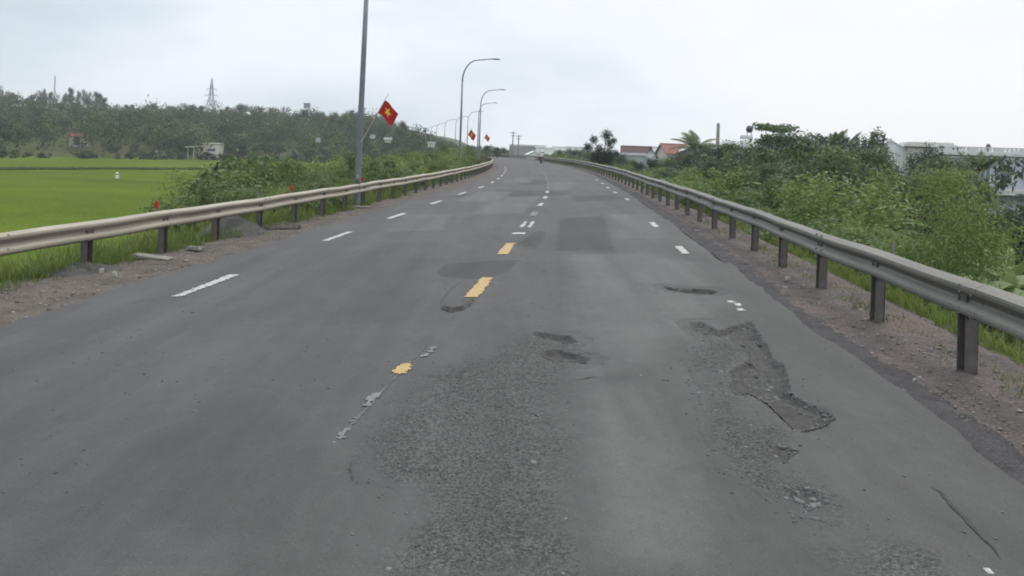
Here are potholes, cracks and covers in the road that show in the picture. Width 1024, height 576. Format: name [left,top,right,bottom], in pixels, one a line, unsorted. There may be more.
pothole [749,386,832,432]
pothole [533,332,576,344]
crack [930,485,1000,557]
pothole [767,446,798,462]
pothole [689,322,791,413]
pothole [542,350,591,364]
pothole [790,487,825,506]
pothole [664,286,717,294]
pothole [442,298,474,312]
